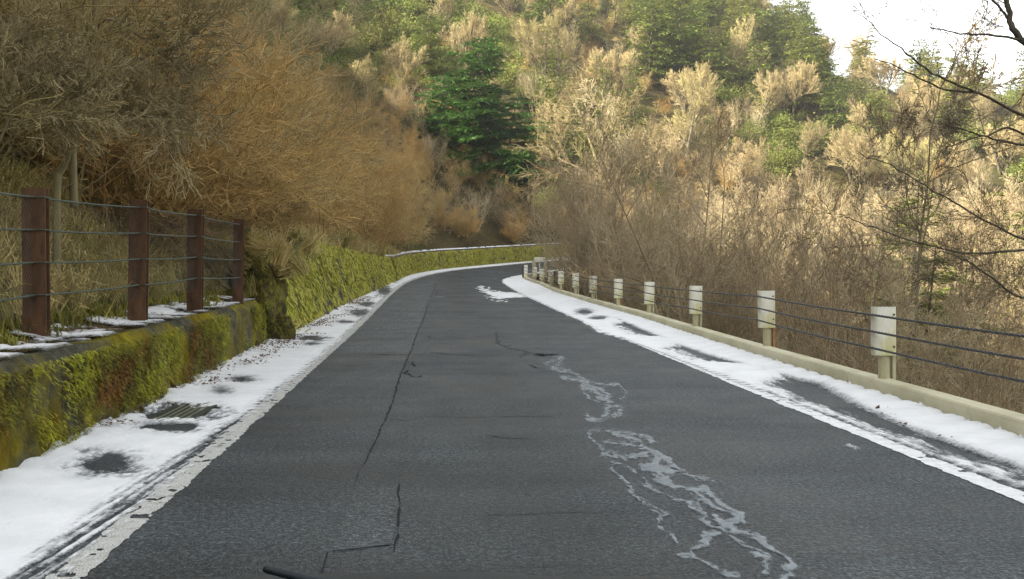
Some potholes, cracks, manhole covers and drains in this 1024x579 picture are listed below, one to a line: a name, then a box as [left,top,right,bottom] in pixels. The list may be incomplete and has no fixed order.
drain grate [144,403,218,422]
crack [495,331,537,368]
crack [320,482,401,573]
